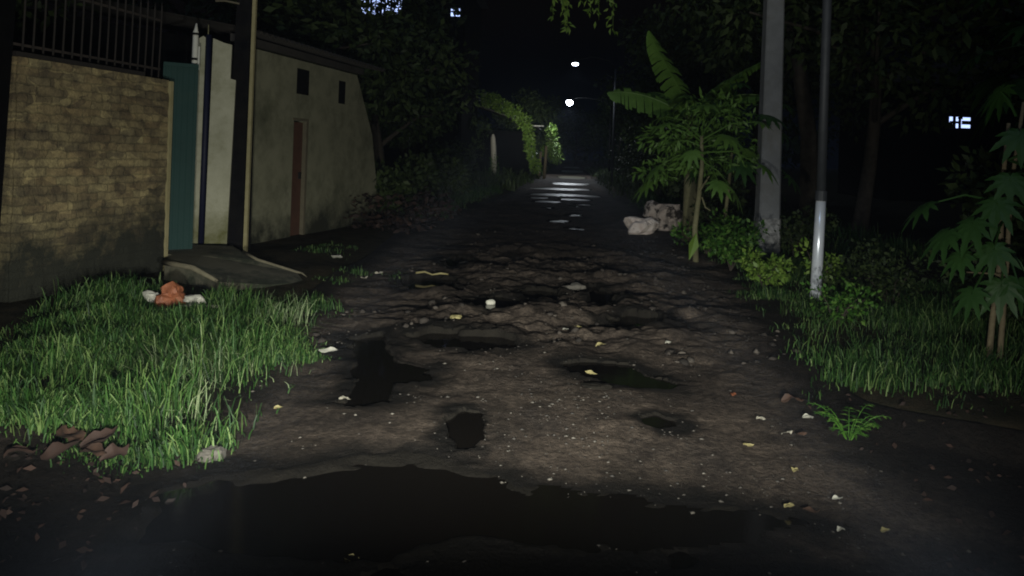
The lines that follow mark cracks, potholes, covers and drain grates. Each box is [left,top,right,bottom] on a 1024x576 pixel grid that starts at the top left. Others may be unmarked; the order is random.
pothole [403,325,518,351]
pothole [456,294,531,310]
pothole [442,407,487,450]
pothole [332,331,432,407]
pothole [561,358,680,390]
pothole [639,412,680,428]
